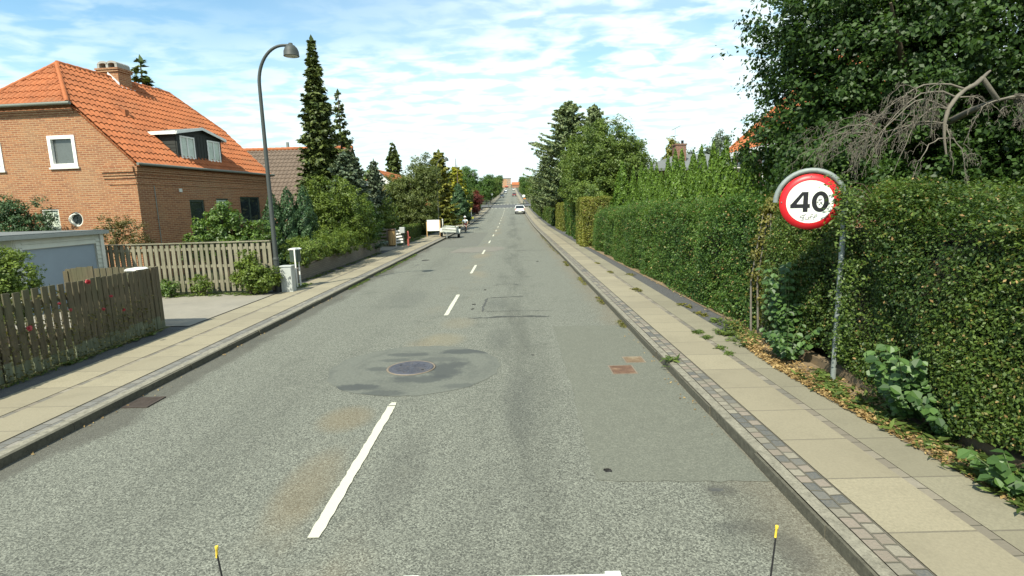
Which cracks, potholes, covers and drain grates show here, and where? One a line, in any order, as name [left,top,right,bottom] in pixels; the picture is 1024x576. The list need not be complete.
manhole cover [608,365,638,374]
manhole cover [386,360,436,376]
